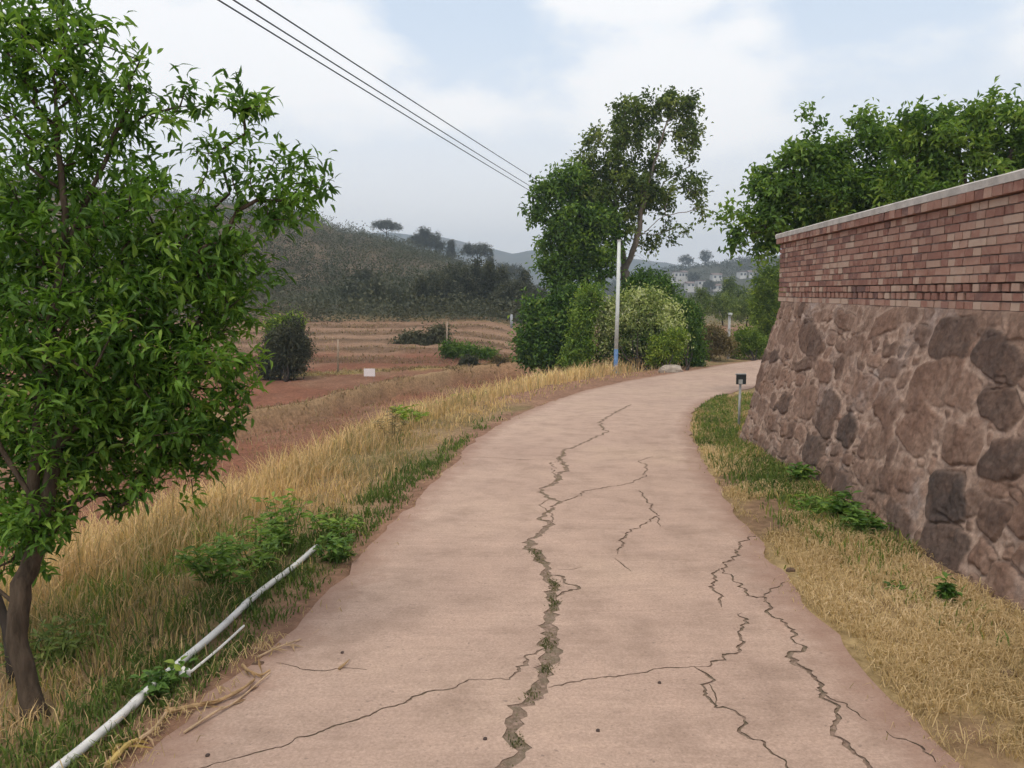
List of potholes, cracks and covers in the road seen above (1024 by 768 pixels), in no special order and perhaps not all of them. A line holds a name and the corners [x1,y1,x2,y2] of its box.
crack [202,405,693,768]
crack [695,536,936,768]
